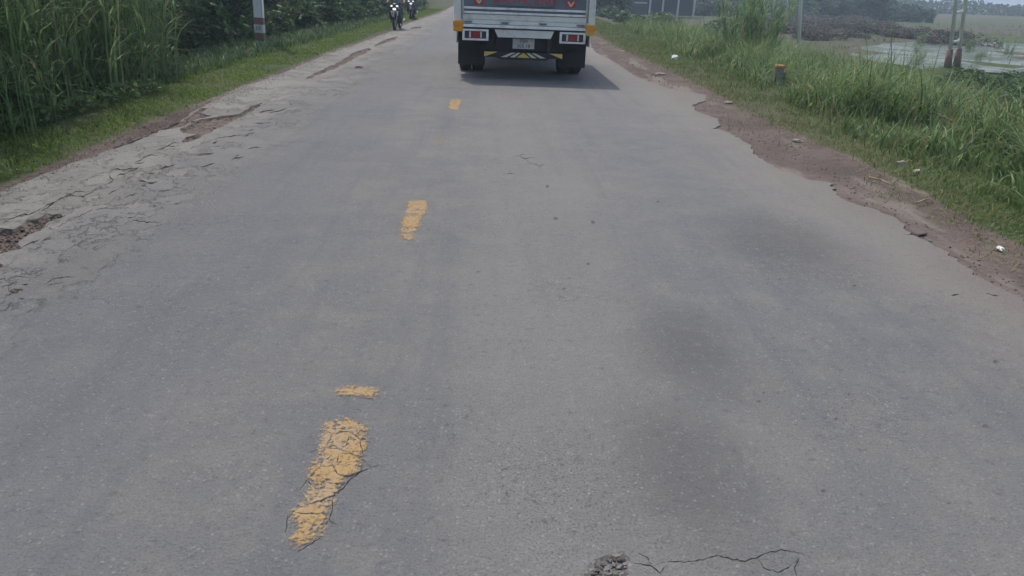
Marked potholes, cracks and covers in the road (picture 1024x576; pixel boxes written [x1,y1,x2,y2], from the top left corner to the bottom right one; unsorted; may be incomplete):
crack [6,140,182,227]
pothole [0,213,63,254]
pothole [180,102,263,143]
crack [212,108,287,160]
pothole [156,108,210,131]
pothole [306,48,371,79]
crack [635,549,802,576]
pothole [584,551,633,576]
